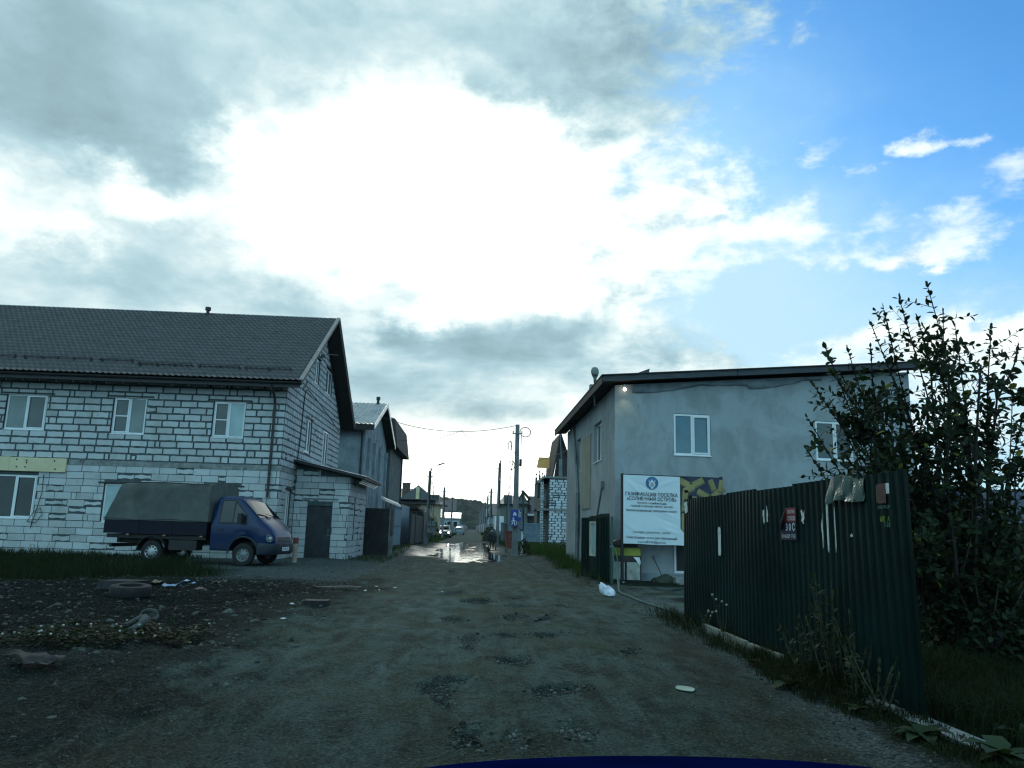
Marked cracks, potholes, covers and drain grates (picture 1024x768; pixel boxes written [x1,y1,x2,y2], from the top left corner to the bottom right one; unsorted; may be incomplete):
pothole [515,630,573,639]
pothole [515,679,599,702]
pothole [452,597,502,605]
pothole [478,654,544,668]
pothole [454,633,492,654]
pothole [441,720,513,757]
pothole [545,718,601,743]
pothole [477,725,547,756]
pothole [492,612,541,622]
pothole [613,647,648,657]
pothole [431,615,475,624]
pothole [521,614,562,623]
